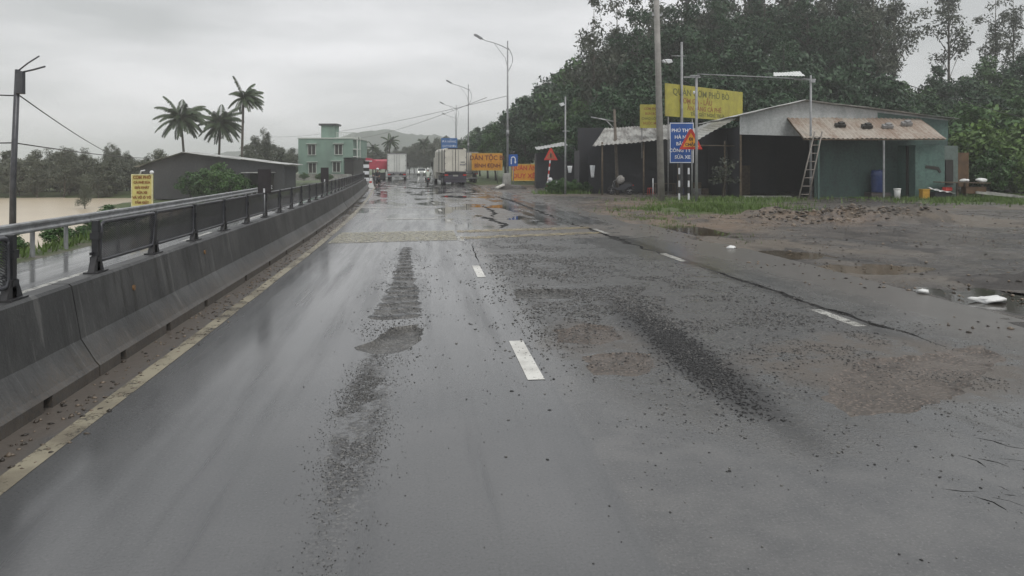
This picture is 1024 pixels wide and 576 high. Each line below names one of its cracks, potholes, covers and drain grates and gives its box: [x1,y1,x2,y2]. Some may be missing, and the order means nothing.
crack [471,195,946,347]
crack [947,487,1022,510]
crack [958,438,1023,467]
